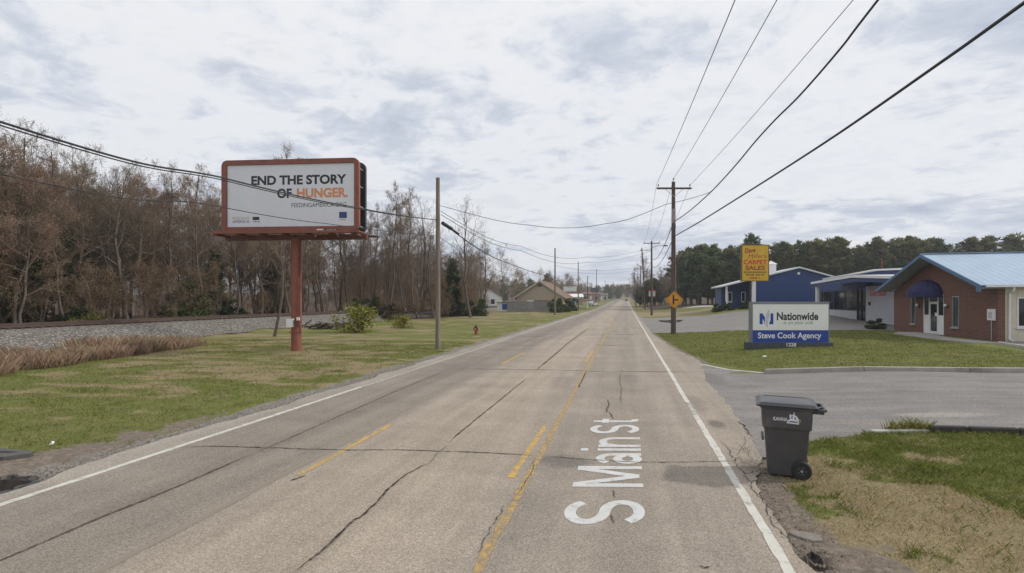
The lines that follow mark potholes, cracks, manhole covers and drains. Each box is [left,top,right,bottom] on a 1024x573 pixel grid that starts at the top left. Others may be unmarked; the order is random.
crack [193,369,809,571]
pothole [804,550,826,569]
